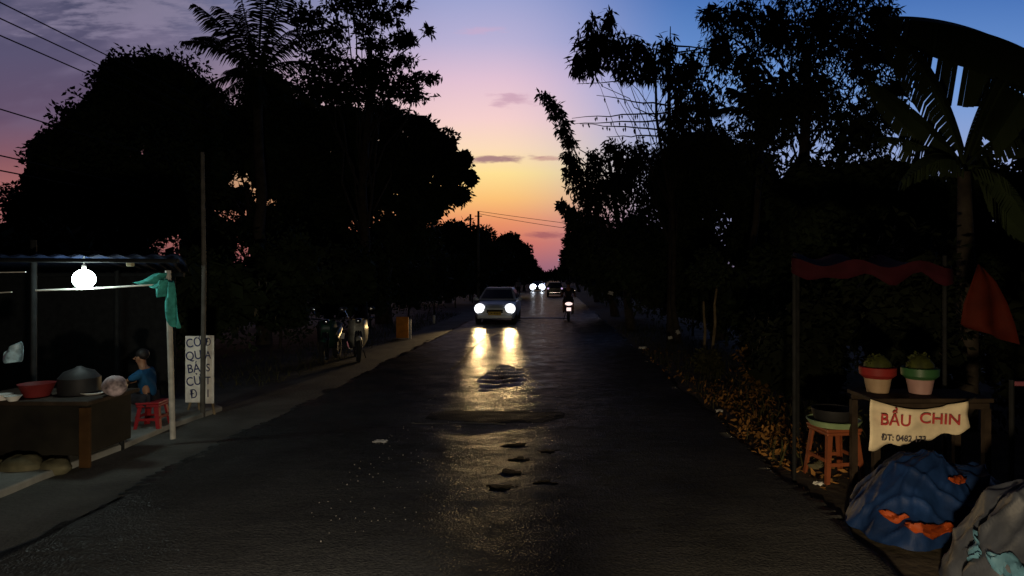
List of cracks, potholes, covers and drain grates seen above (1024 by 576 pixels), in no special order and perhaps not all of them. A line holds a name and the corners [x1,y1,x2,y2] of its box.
pothole [476,364,527,392]
pothole [497,469,525,477]
pothole [486,484,518,493]
